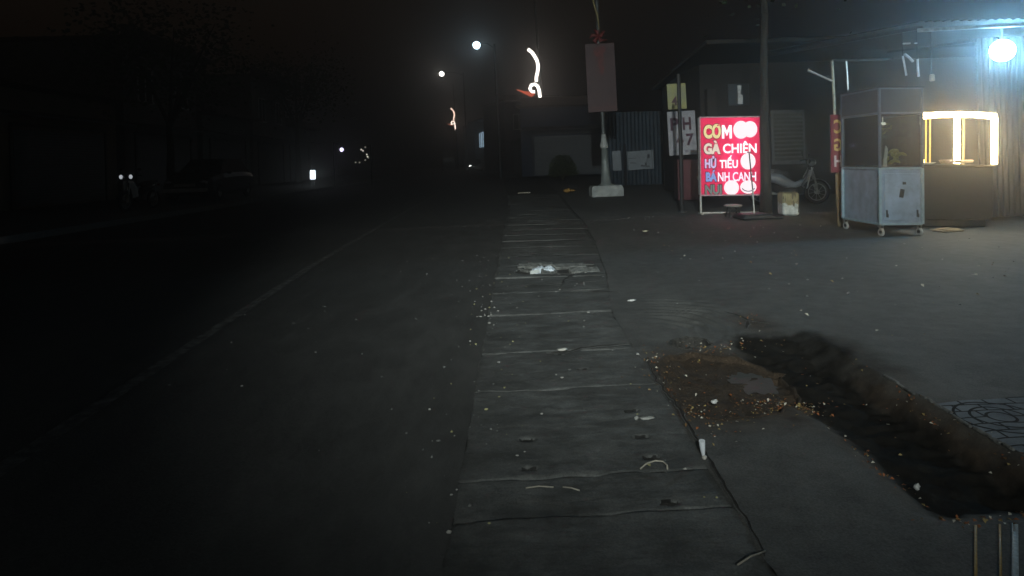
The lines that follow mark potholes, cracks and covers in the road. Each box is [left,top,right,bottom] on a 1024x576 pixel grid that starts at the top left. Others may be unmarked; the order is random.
crack [648,361,765,556]
pothole [668,336,714,350]
crack [528,274,620,292]
pothole [656,351,802,422]
